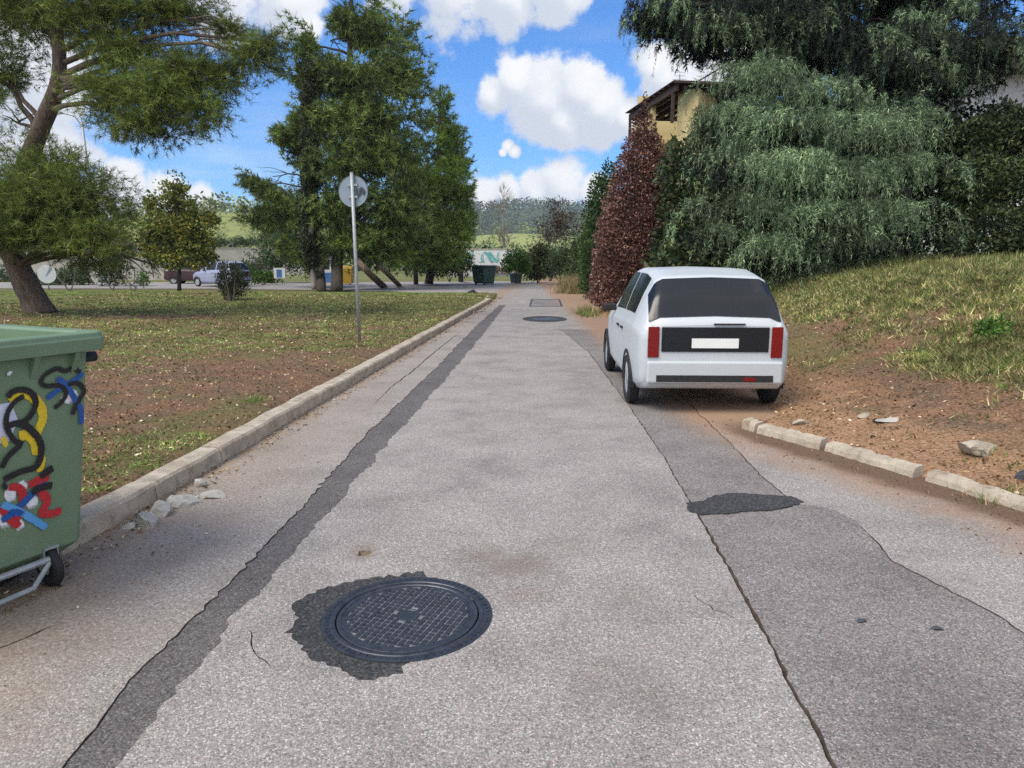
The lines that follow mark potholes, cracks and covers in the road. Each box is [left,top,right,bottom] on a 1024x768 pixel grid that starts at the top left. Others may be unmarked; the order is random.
manhole cover [529,299,563,307]
manhole cover [321,577,492,664]
crack [672,388,786,496]
